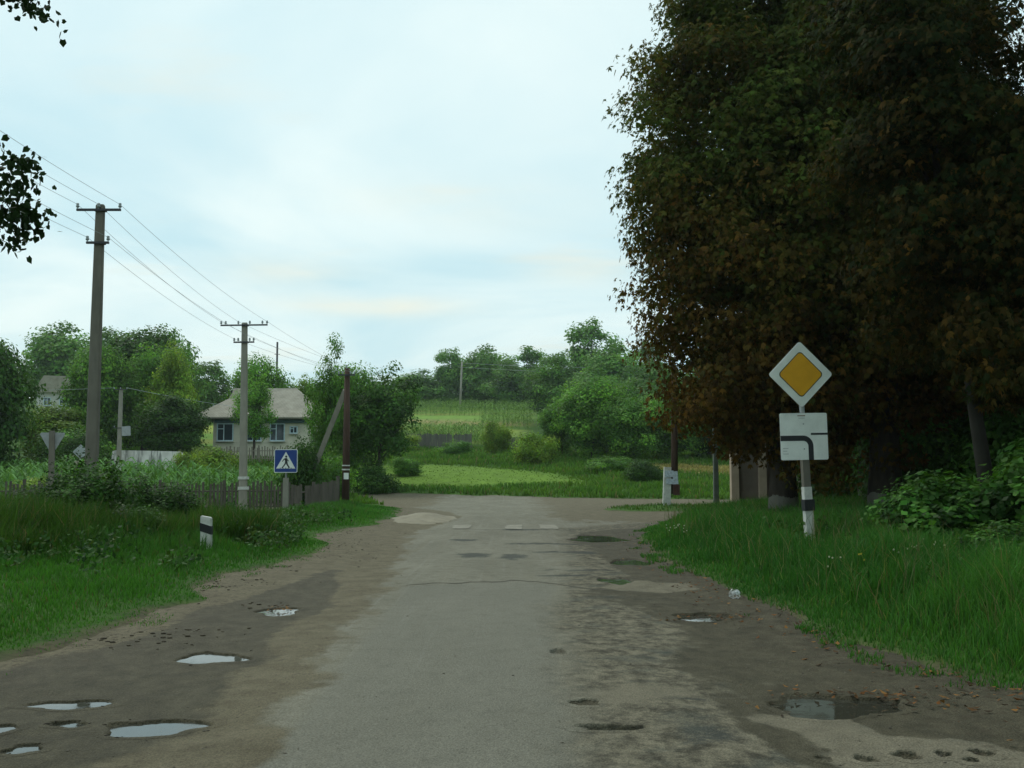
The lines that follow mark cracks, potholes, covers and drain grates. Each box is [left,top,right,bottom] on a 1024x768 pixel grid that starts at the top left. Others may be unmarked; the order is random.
pothole [160,650,265,666]
pothole [0,722,30,736]
pothole [755,691,921,722]
pothole [596,556,672,569]
pothole [244,606,310,618]
pothole [5,698,131,712]
crack [410,580,622,592]
pothole [557,534,641,544]
pothole [0,741,54,757]
pothole [663,611,748,623]
pothole [92,717,228,740]
pothole [551,722,672,733]
